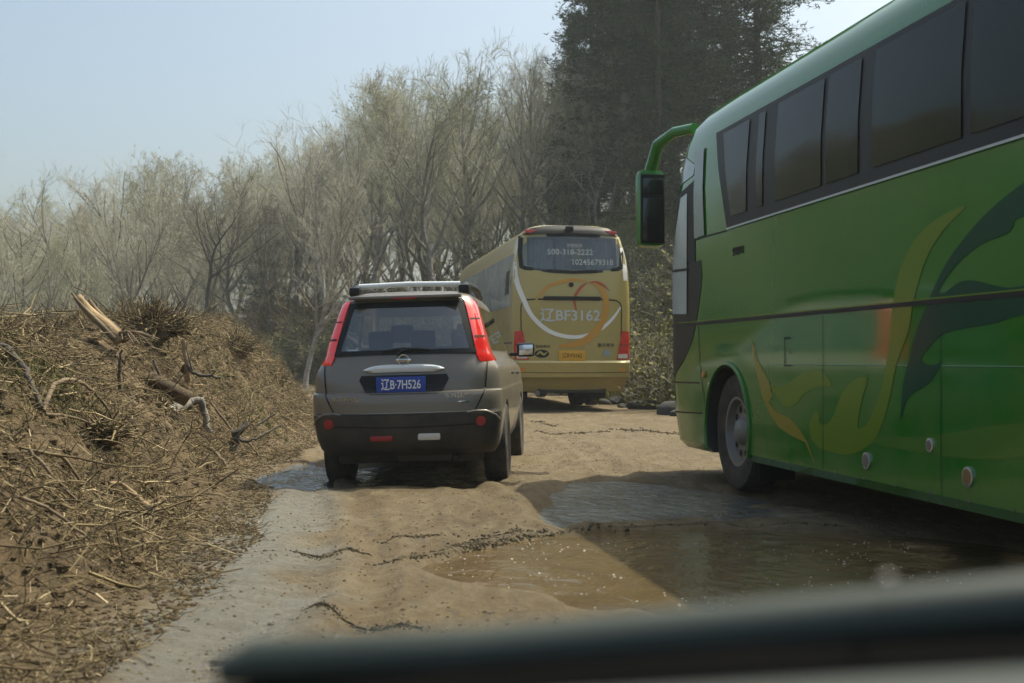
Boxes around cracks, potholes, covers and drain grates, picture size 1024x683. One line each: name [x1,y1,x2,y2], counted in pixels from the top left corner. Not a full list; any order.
crack [529,420,679,435]
pothole [254,462,334,491]
crack [285,520,907,566]
crack [301,601,431,634]
pothole [395,526,1024,616]
